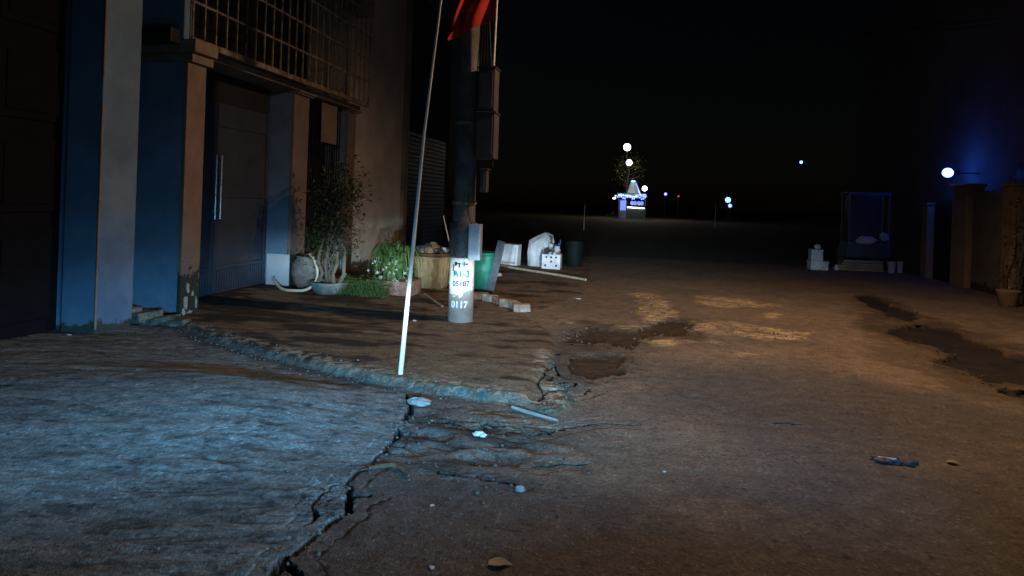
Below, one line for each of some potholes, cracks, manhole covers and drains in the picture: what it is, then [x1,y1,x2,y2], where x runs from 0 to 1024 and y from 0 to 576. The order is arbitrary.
crack [247,348,655,576]
pothole [555,317,705,353]
pothole [864,323,1024,390]
pothole [534,351,645,384]
pothole [845,293,935,326]
pothole [973,382,1024,401]
